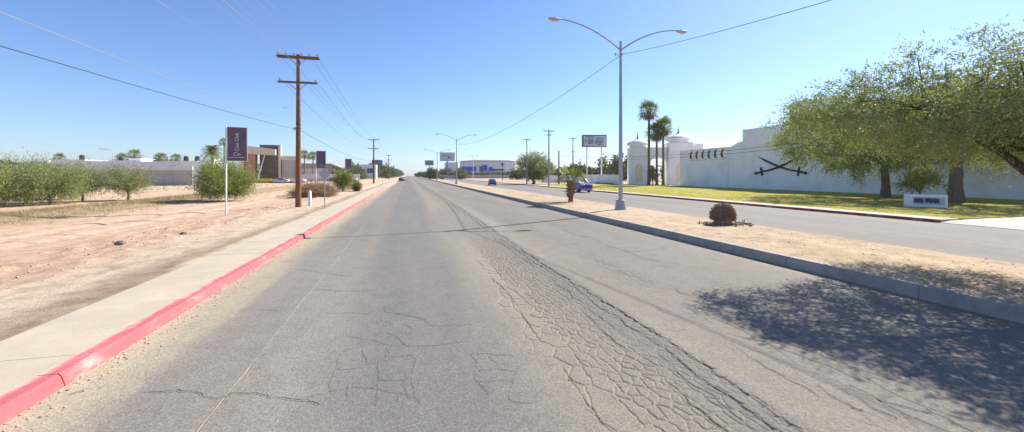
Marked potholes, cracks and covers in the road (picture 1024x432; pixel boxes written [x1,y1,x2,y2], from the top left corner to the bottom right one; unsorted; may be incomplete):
crack [141,191,1024,432]
